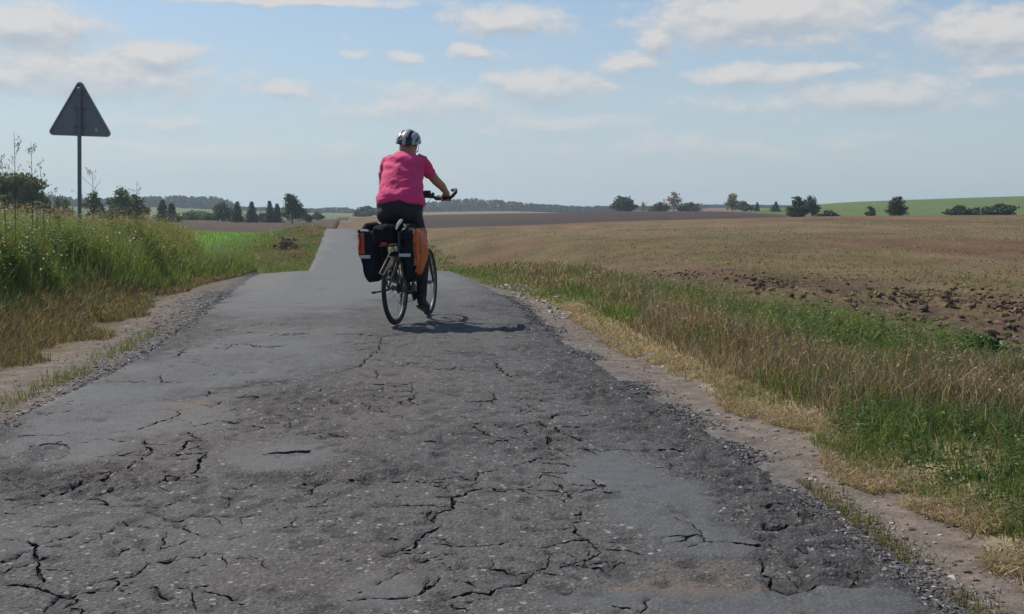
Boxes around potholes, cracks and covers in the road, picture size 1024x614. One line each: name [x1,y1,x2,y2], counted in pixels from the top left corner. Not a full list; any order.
crack [0,372,351,614]
crack [214,323,862,613]
